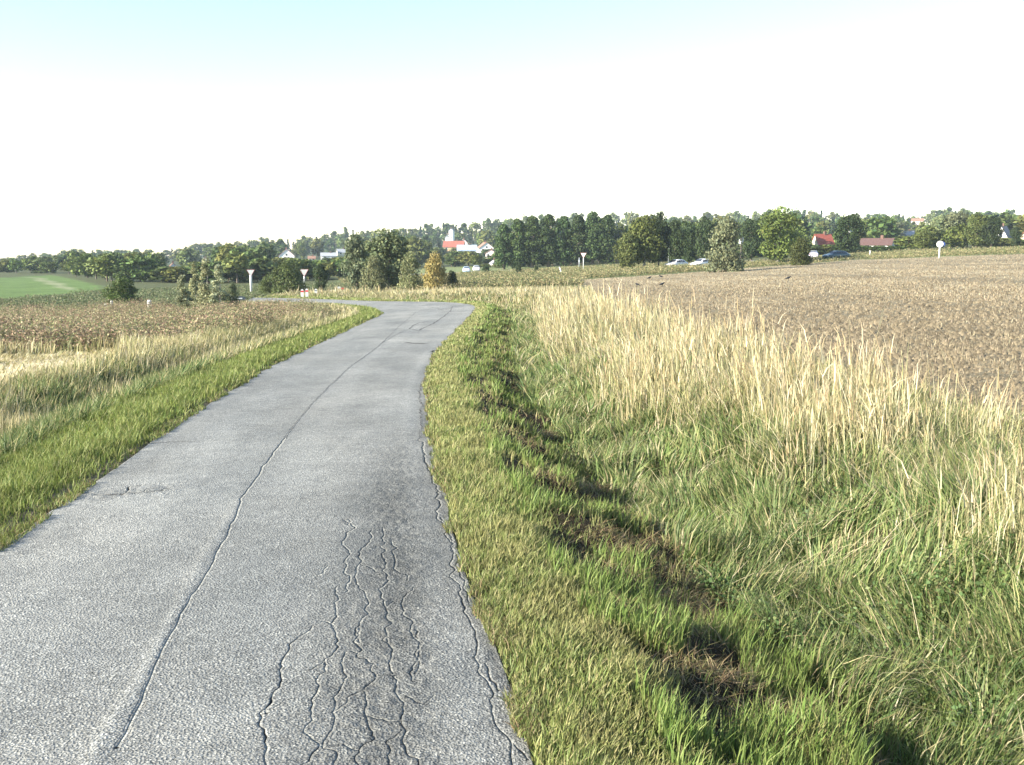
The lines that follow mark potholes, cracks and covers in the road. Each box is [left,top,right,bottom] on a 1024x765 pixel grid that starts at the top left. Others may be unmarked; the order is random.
crack [255,371,531,765]
